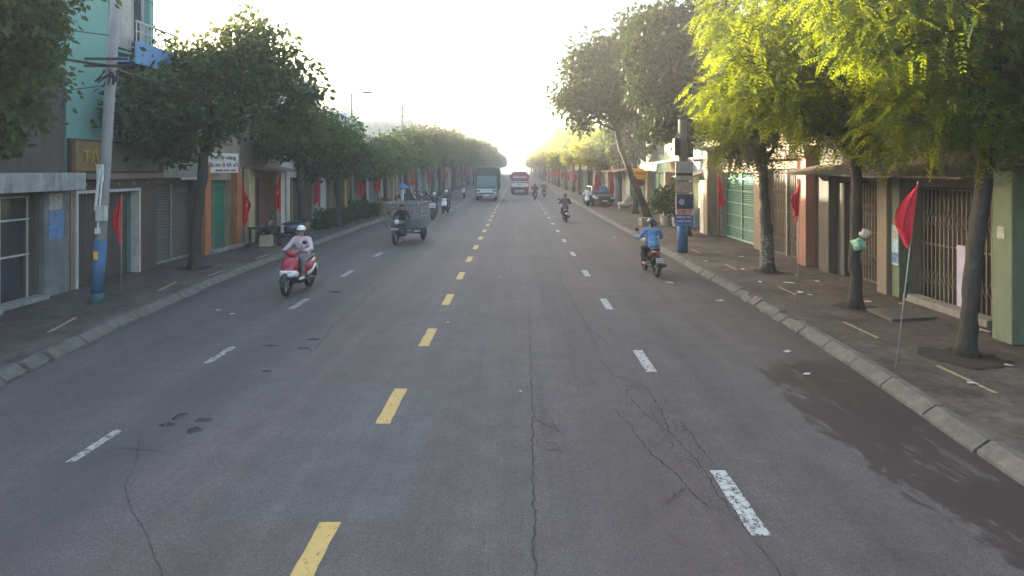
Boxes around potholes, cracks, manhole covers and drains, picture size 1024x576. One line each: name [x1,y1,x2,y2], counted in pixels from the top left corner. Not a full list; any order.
crack [601,361,782,576]
crack [528,312,565,575]
crack [88,433,179,576]
crack [311,268,395,352]
